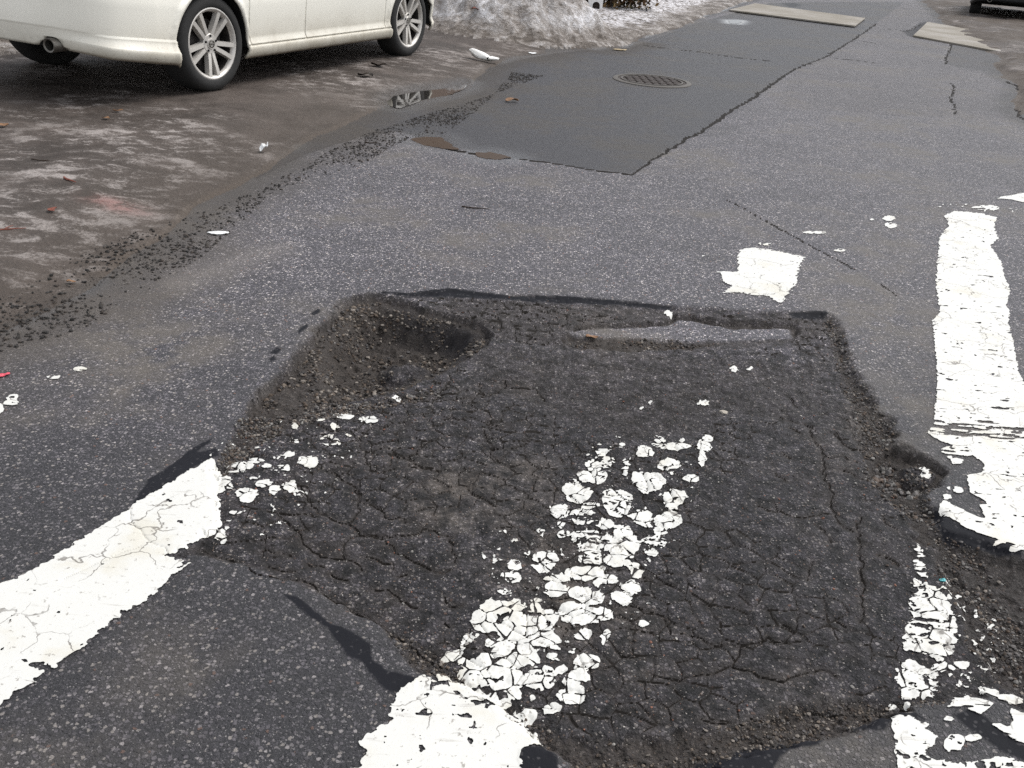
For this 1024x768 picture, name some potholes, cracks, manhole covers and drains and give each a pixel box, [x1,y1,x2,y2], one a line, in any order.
crack [949,83,957,115]
pothole [870,442,952,498]
pothole [246,291,495,421]
crack [726,200,897,297]
manhole cover [613,74,692,88]
crack [203,297,950,737]
crack [1006,81,1024,120]
